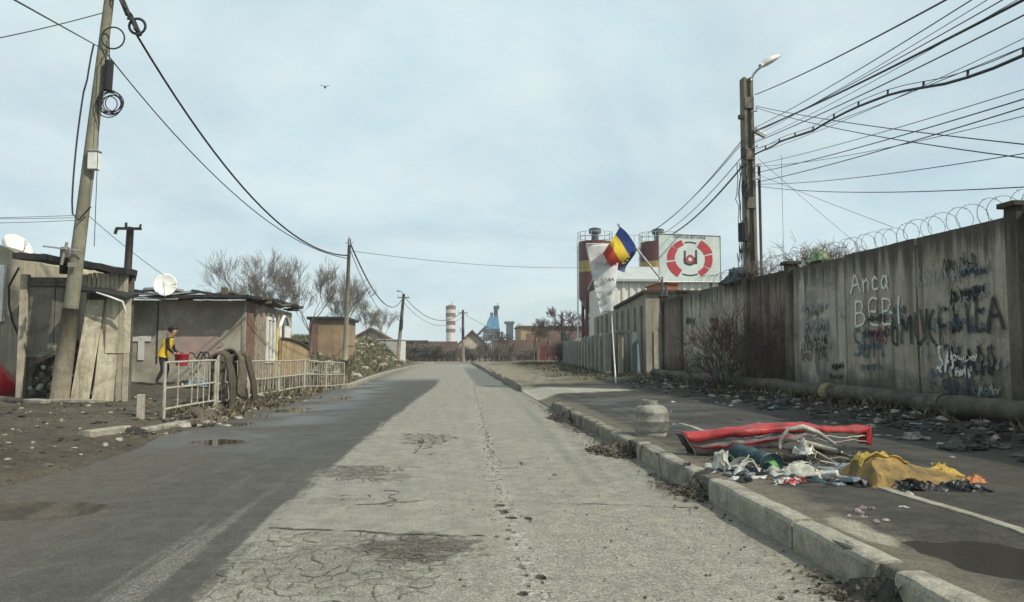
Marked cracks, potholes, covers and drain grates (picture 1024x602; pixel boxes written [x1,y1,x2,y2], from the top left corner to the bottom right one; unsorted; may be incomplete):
crack [188,529,464,602]
crack [332,432,456,509]
pothole [0,502,116,521]
